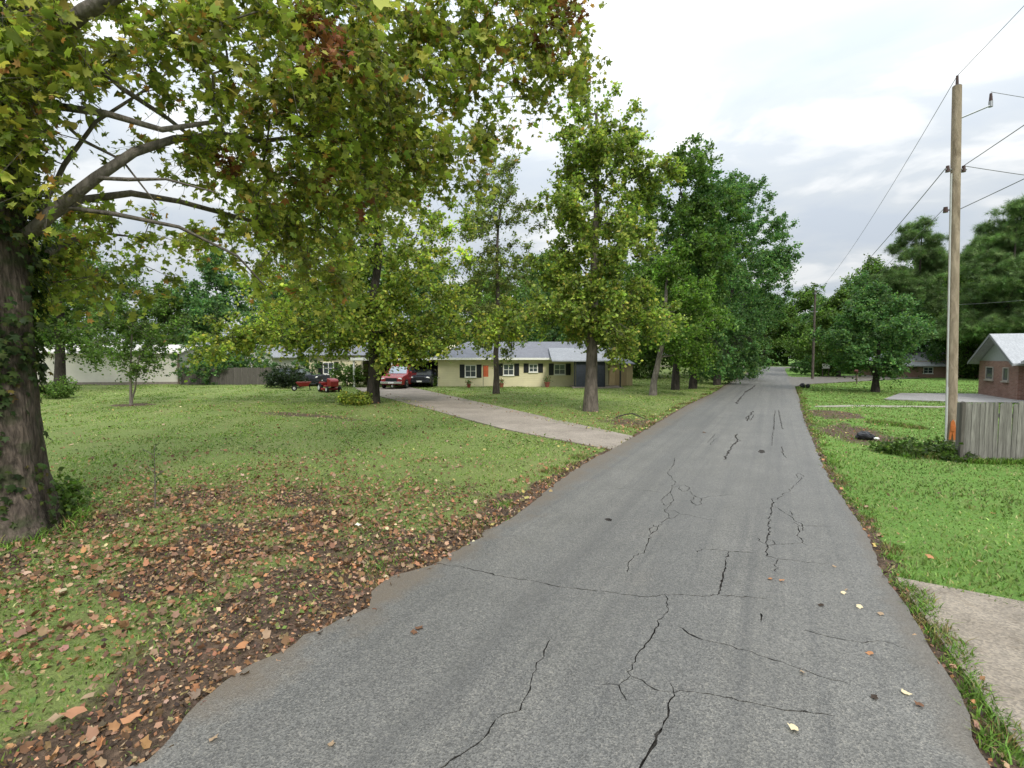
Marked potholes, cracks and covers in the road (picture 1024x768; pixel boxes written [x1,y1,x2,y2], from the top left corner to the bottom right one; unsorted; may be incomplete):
crack [444,552,822,768]
crack [627,459,702,572]
crack [710,386,755,459]
crack [758,477,809,571]
